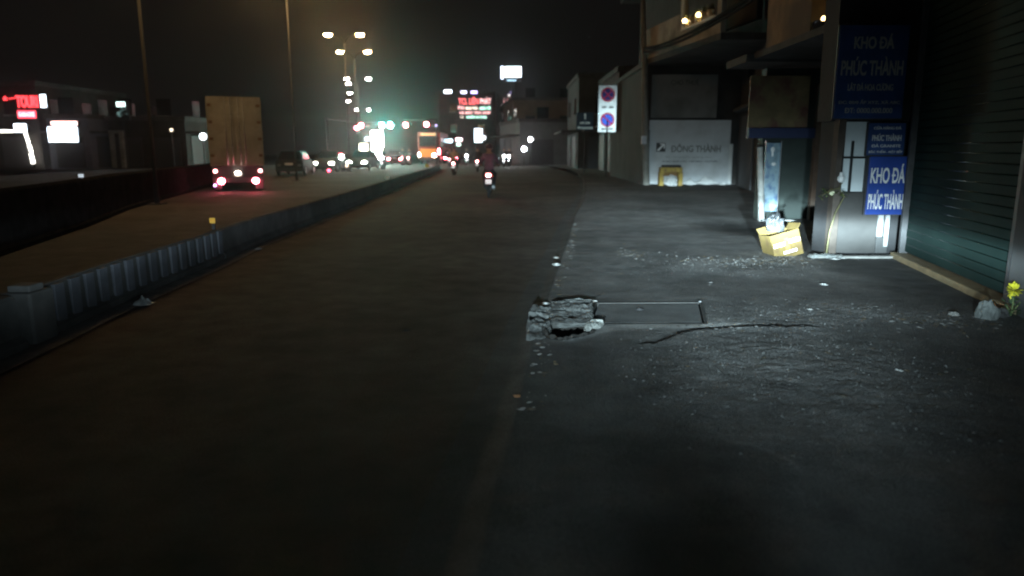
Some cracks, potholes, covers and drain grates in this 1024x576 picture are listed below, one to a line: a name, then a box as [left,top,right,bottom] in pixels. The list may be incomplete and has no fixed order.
pothole [541,317,597,341]
crack [643,325,804,343]
manhole cover [593,300,707,325]
